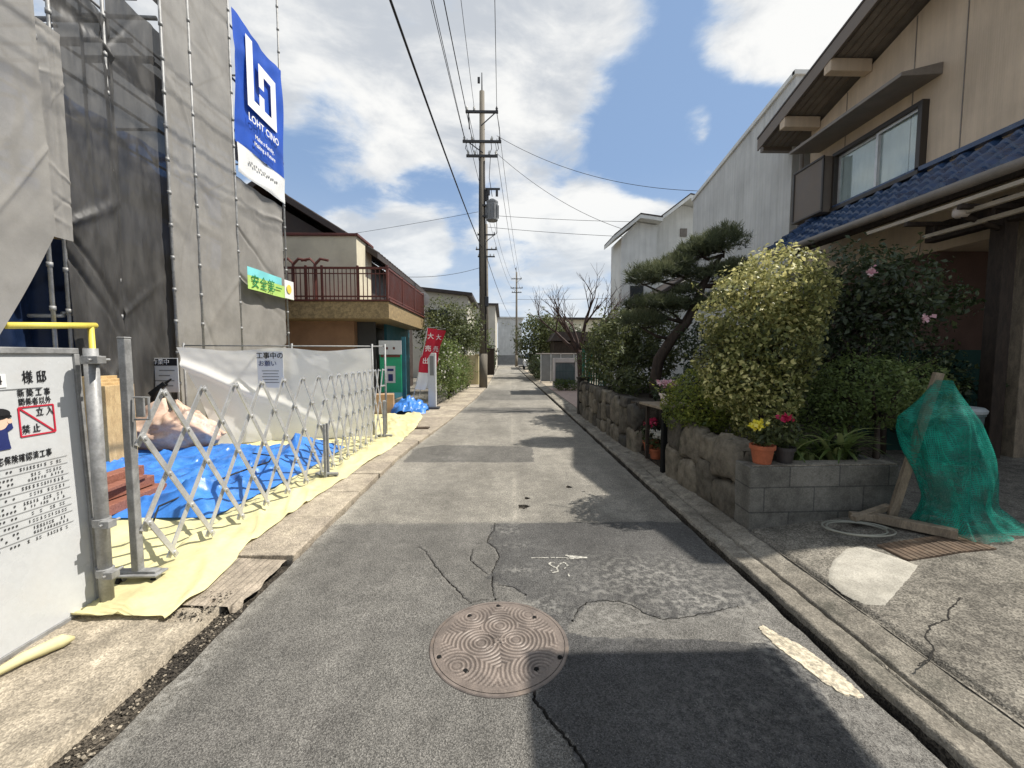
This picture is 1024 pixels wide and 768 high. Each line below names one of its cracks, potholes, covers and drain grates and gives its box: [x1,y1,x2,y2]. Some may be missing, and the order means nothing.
crack [416,523,527,605]
manhole cover [429,601,569,699]
crack [567,597,740,623]
crack [526,670,596,768]
crack [917,597,961,666]
